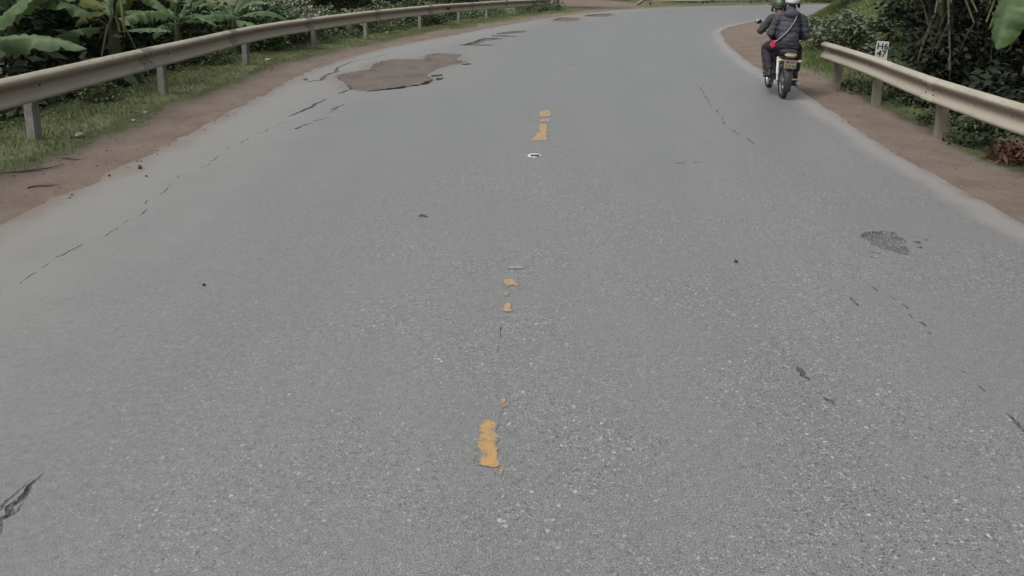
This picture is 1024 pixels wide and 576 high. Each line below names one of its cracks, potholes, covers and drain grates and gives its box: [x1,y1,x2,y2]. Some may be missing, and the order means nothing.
crack [850,286,932,335]
crack [1006,413,1024,432]
crack [796,366,836,406]
crack [0,474,42,536]
crack [21,54,385,284]
